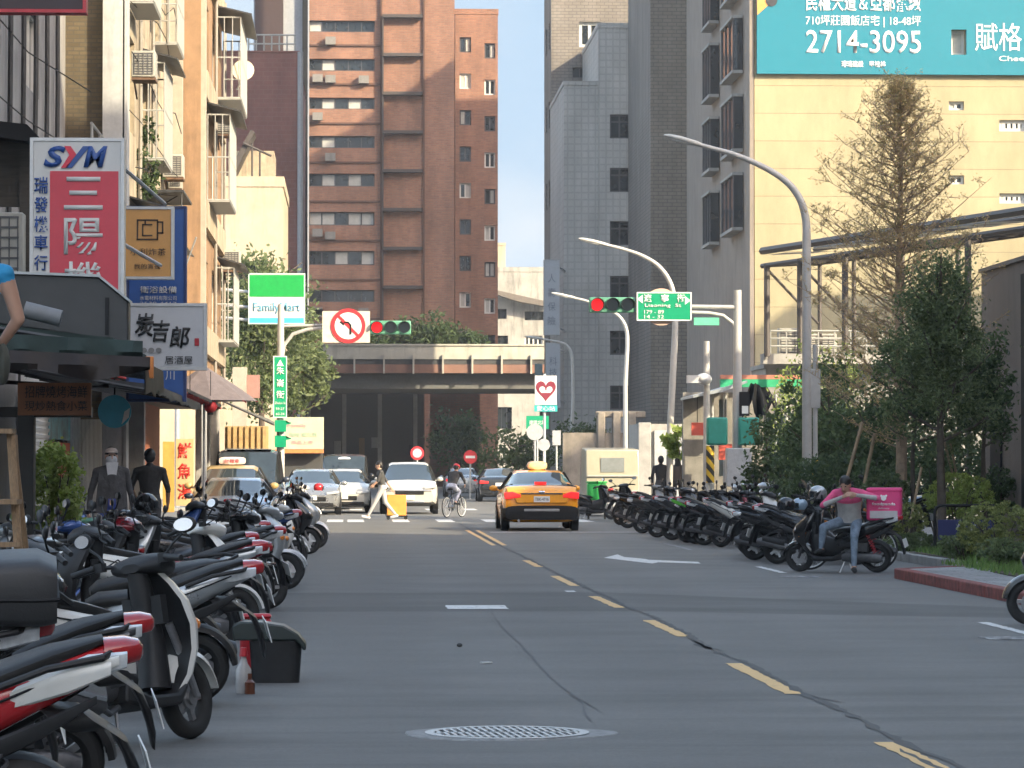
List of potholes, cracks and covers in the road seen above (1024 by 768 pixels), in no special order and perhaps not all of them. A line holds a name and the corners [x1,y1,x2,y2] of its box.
manhole cover [405,726,618,741]
crack [491,611,601,721]
